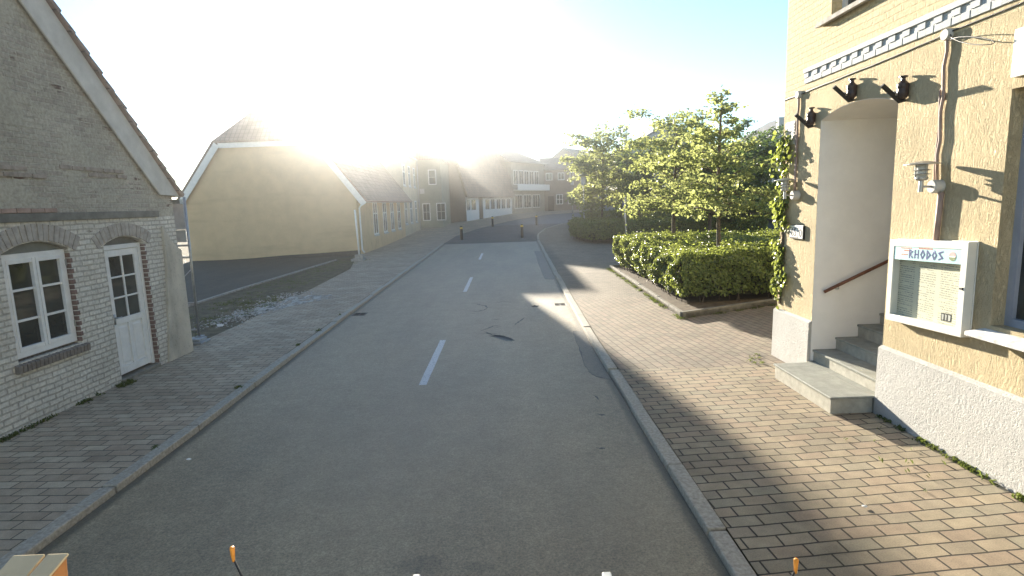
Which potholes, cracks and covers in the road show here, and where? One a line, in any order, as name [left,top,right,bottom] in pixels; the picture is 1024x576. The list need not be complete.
crack [471,301,525,335]
